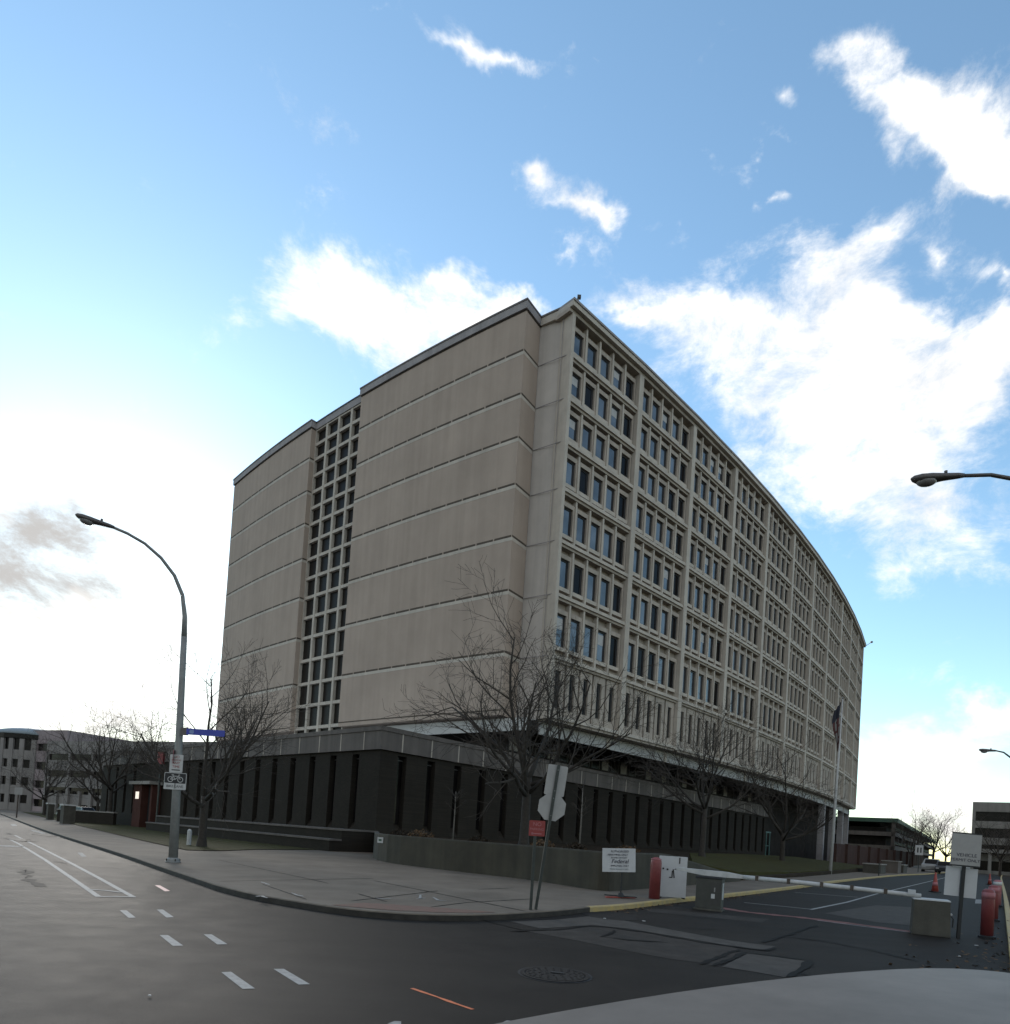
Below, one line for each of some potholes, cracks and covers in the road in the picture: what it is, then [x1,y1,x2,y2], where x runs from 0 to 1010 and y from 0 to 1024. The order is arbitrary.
manhole cover [518,966,593,983]
